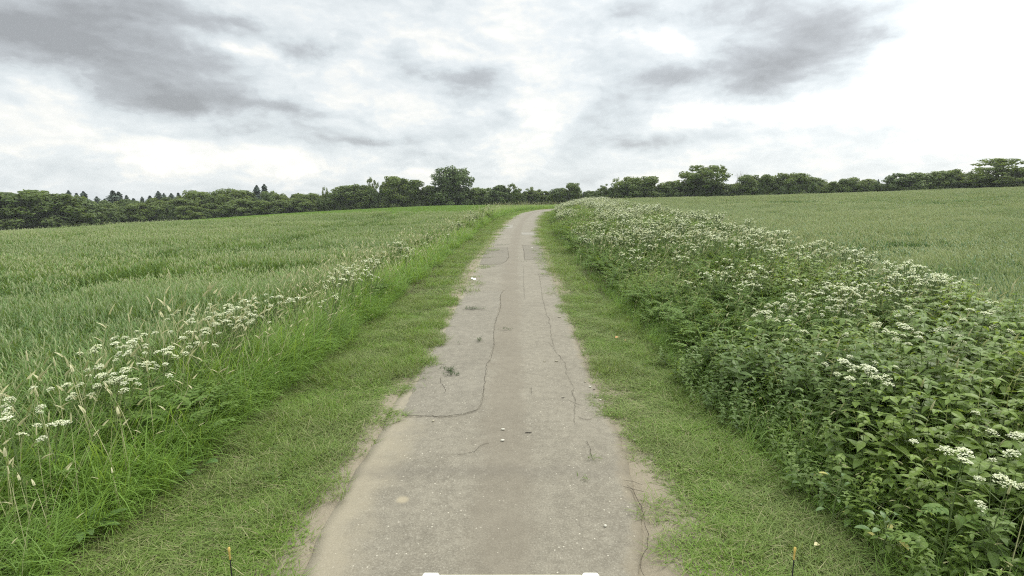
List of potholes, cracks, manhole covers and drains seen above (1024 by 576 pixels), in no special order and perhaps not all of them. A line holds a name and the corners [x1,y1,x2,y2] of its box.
crack [410,296,501,417]
crack [624,480,649,575]
